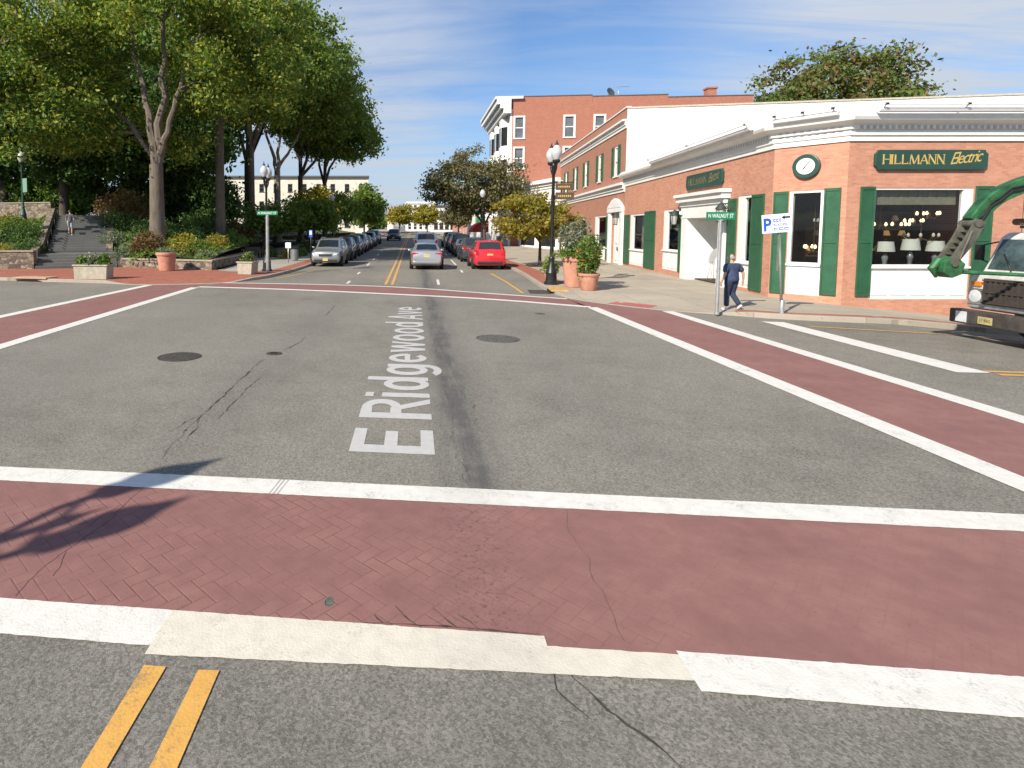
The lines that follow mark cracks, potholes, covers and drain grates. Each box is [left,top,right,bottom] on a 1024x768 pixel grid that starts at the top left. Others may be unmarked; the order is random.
crack [162,359,265,459]
manhole cover [157,352,202,362]
crack [17,490,141,594]
crack [566,511,624,640]
manhole cover [476,335,520,343]
crack [554,674,680,767]
crack [366,607,535,634]
